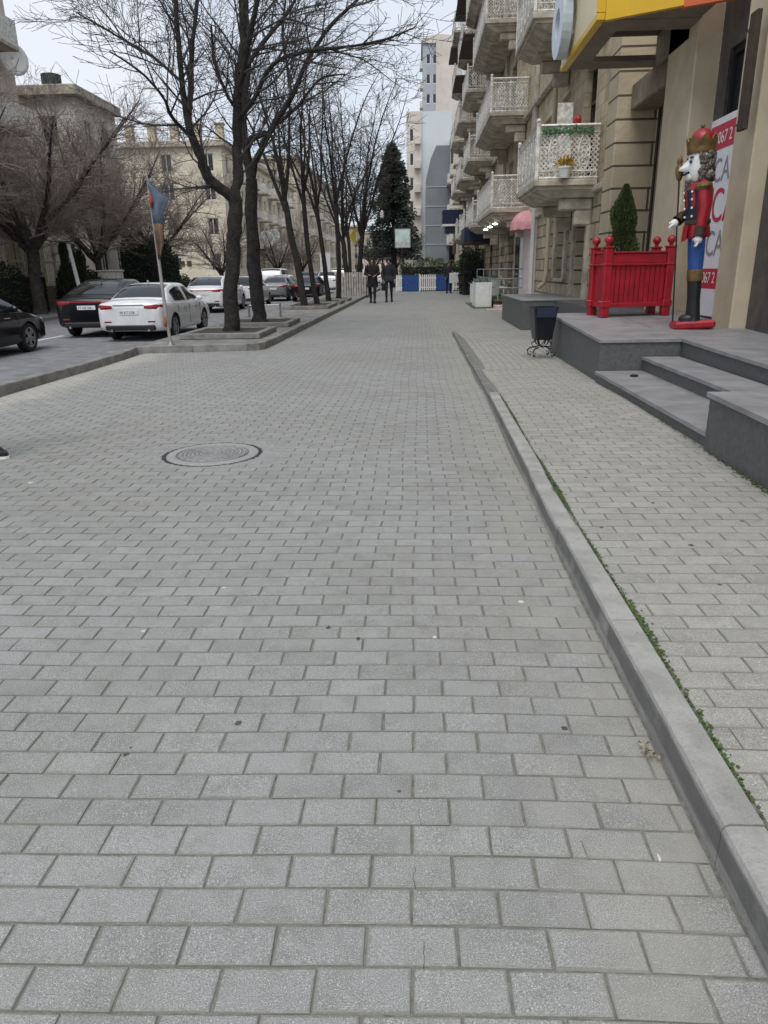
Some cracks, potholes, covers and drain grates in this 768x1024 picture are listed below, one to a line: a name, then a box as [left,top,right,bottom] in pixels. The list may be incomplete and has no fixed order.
manhole cover [161,443,263,467]
